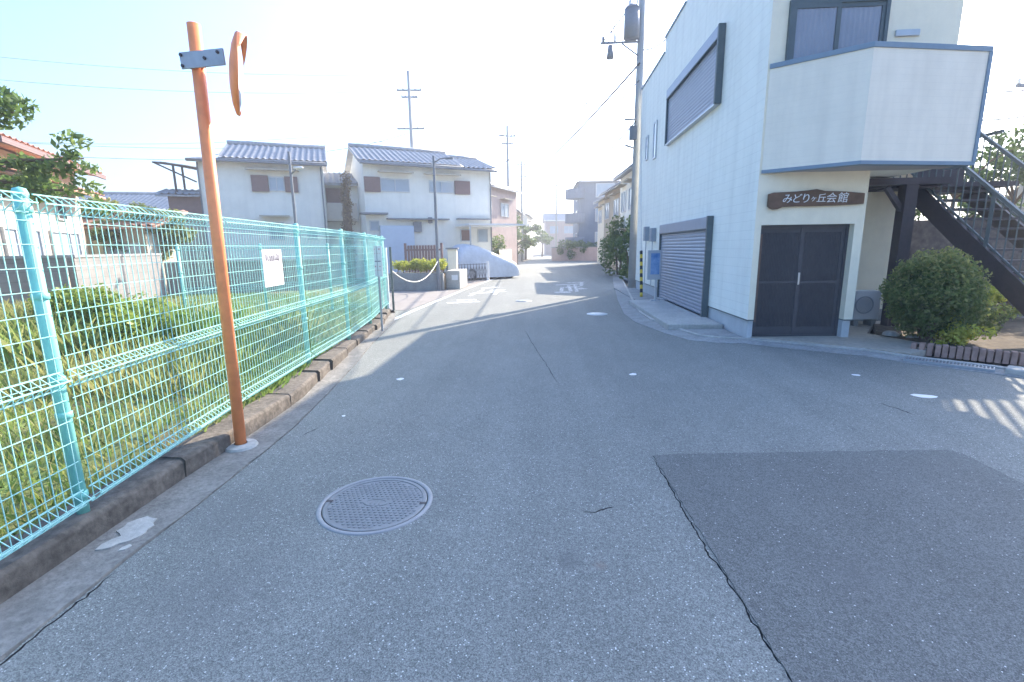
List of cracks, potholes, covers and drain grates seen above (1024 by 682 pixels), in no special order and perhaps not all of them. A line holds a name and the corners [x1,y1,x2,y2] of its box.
drain grate [903,356,995,372]
manhole cover [316,476,433,536]
